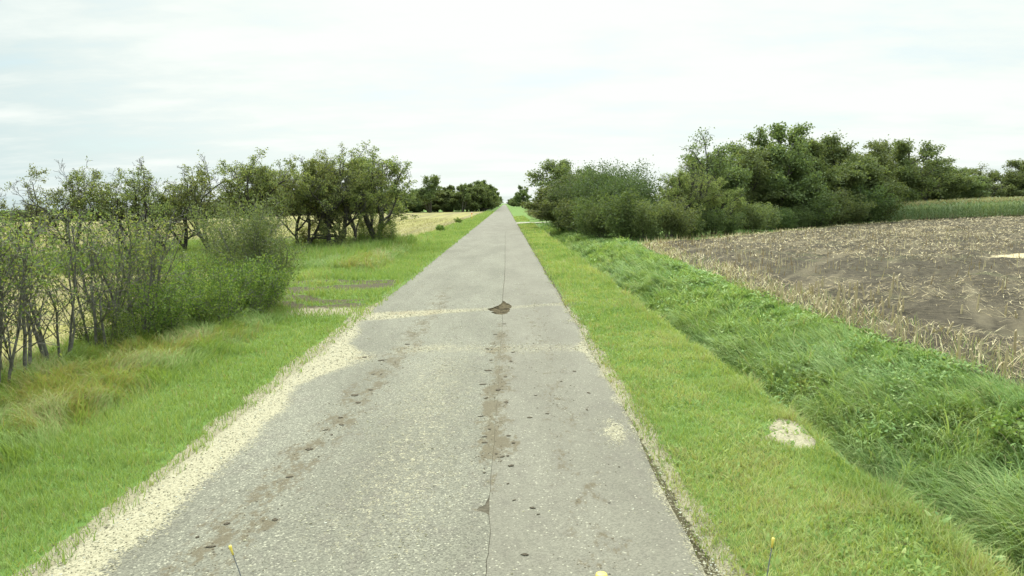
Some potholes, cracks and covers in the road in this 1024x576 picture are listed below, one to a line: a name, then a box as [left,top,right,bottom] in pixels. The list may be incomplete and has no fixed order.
crack [477,315,503,574]
pothole [488,301,512,315]
